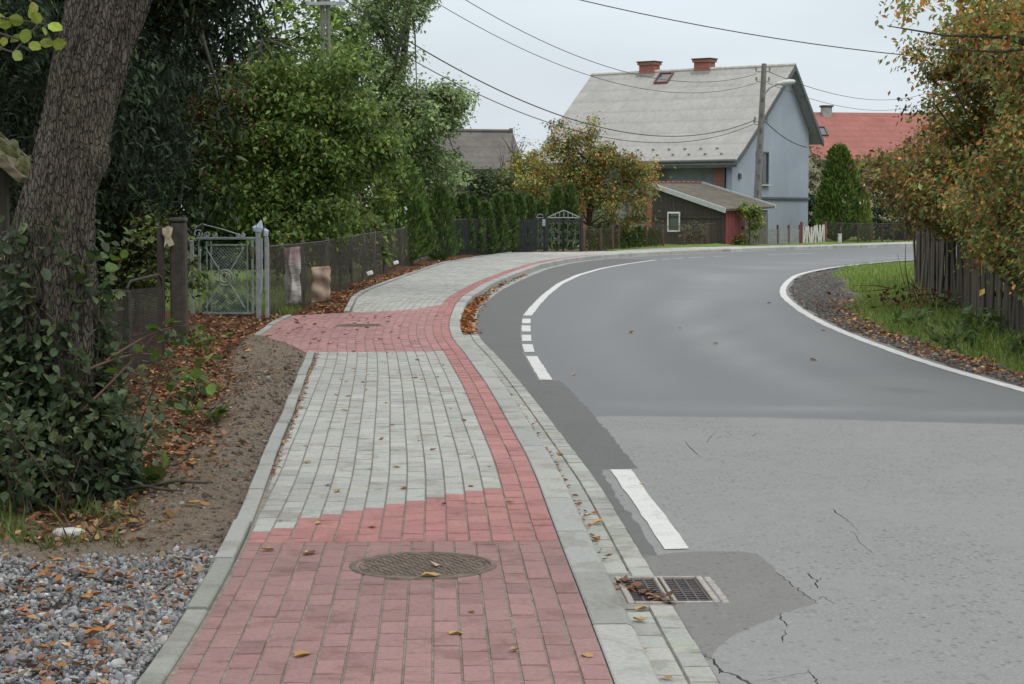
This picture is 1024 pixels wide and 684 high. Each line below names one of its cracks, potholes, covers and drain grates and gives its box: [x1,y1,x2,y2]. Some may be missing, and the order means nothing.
manhole cover [349,552,496,581]
crack [702,654,819,684]
crack [776,572,834,604]
drain grate [615,576,730,604]
